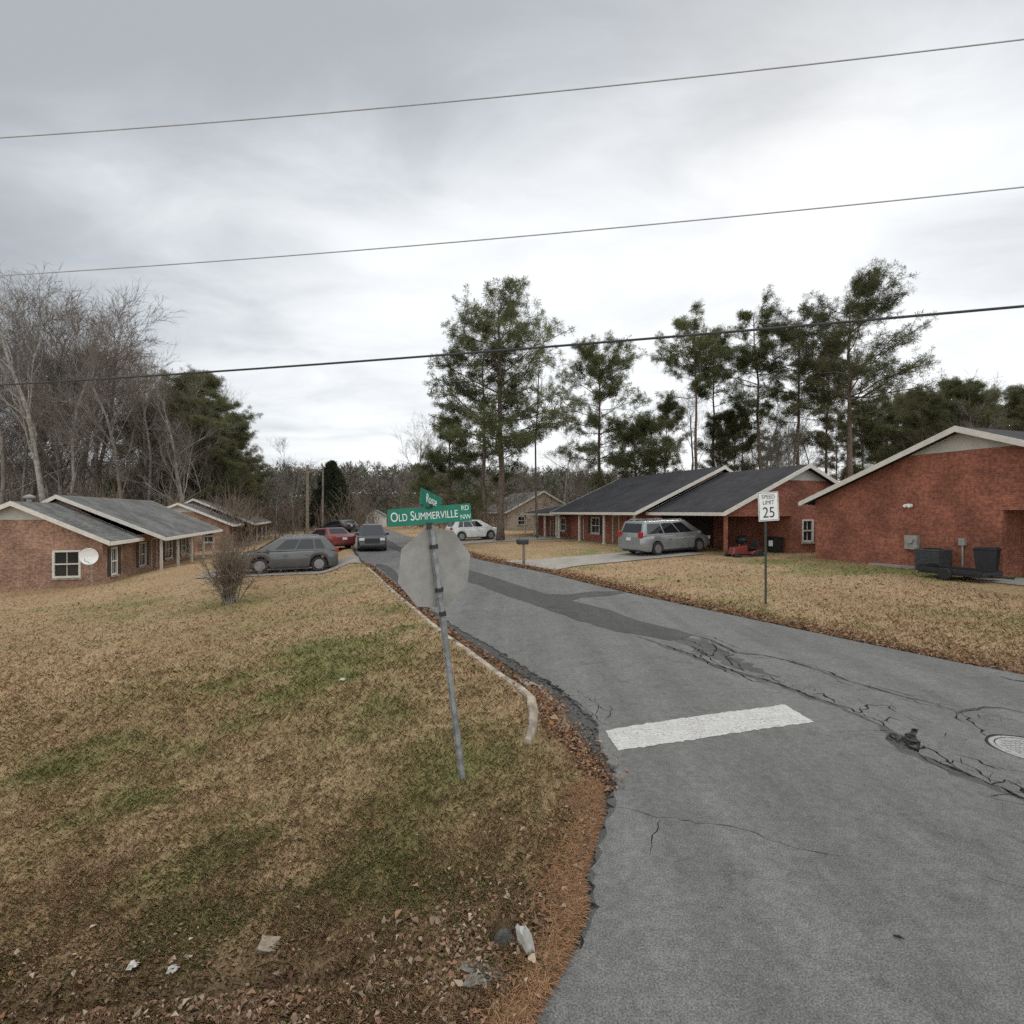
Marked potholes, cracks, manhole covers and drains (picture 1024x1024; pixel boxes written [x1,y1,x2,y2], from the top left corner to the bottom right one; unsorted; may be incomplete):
crack [673,638,1024,799]
pothole [885,730,921,751]
manhole cover [984,734,1024,759]
